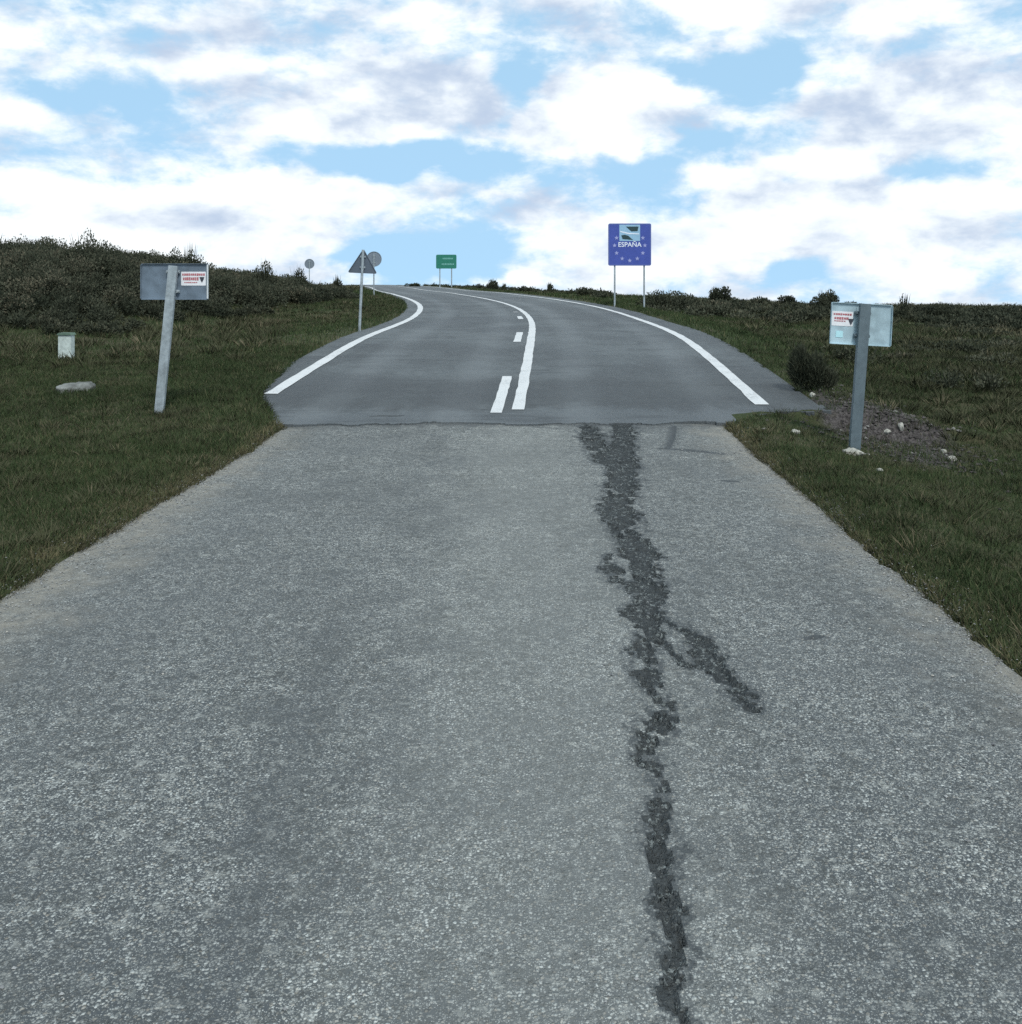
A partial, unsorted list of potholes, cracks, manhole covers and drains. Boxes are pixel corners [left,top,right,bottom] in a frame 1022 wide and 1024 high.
crack [576,424,763,1024]
